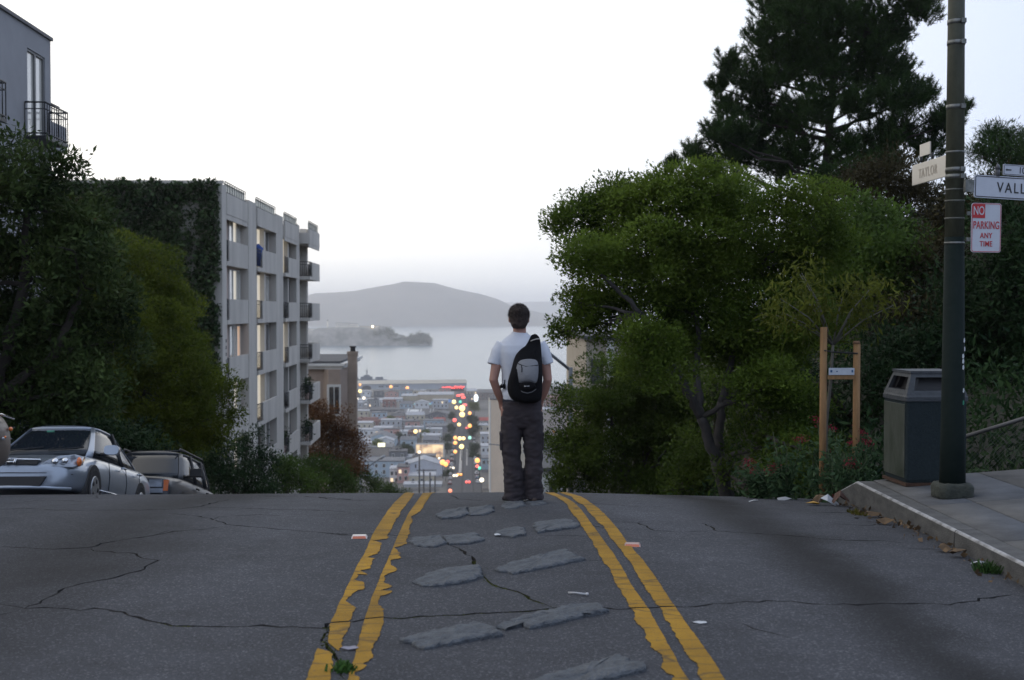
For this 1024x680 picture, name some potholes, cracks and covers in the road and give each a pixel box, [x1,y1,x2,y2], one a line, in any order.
crack [0,496,1023,680]
